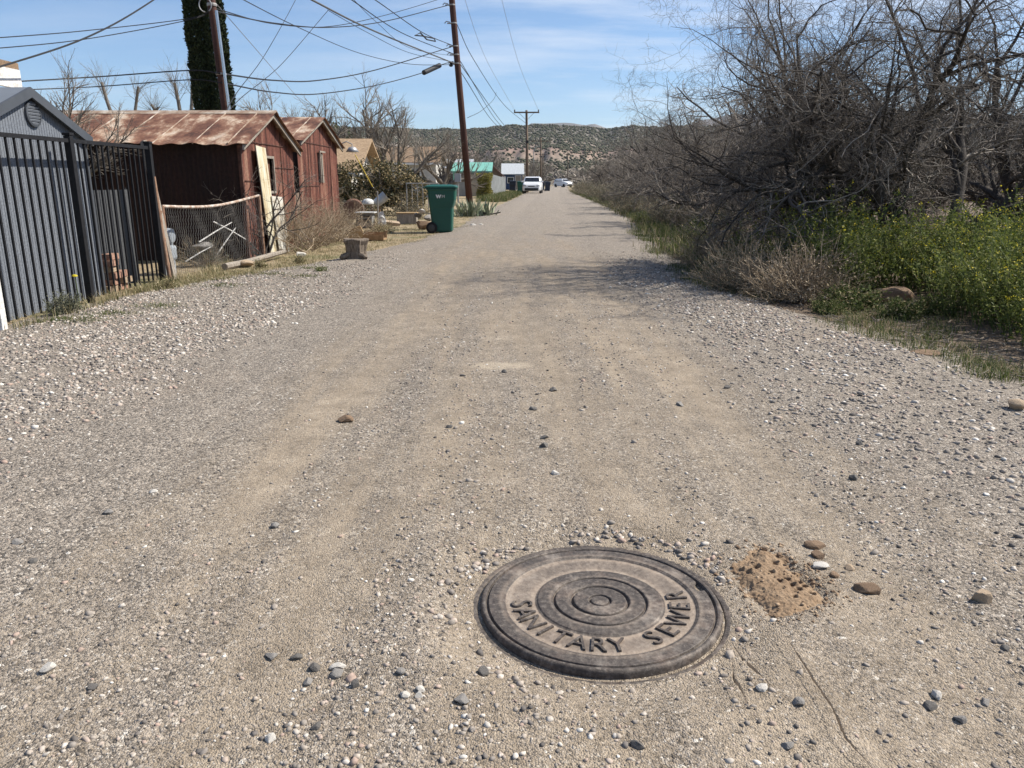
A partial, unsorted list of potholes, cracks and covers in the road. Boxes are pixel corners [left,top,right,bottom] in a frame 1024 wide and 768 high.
crack [718,642,887,768]
manhole cover [473,546,731,684]
